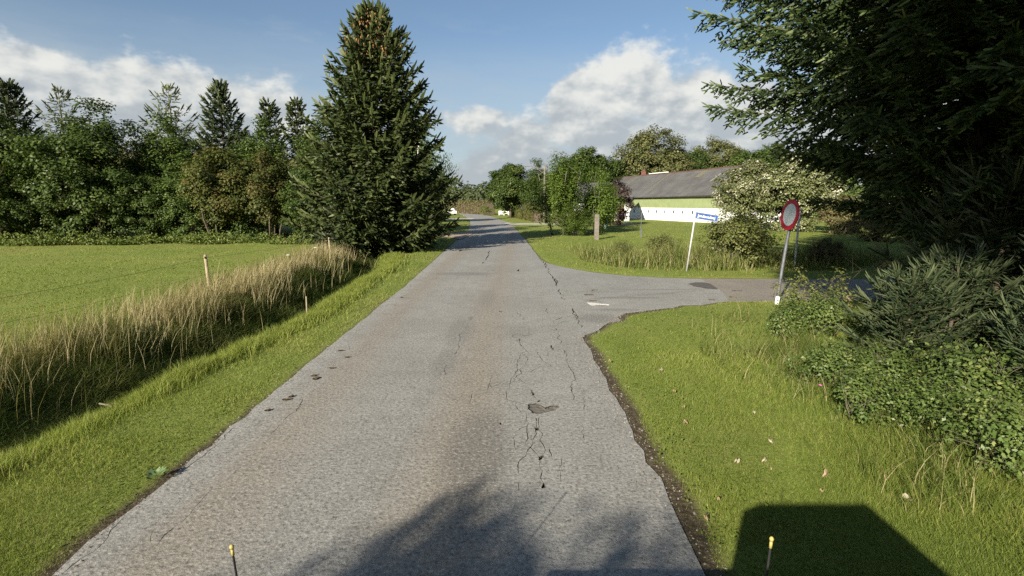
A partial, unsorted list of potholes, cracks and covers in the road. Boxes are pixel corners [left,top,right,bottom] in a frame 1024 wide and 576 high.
crack [440,309,600,489]
pothole [528,403,559,414]
